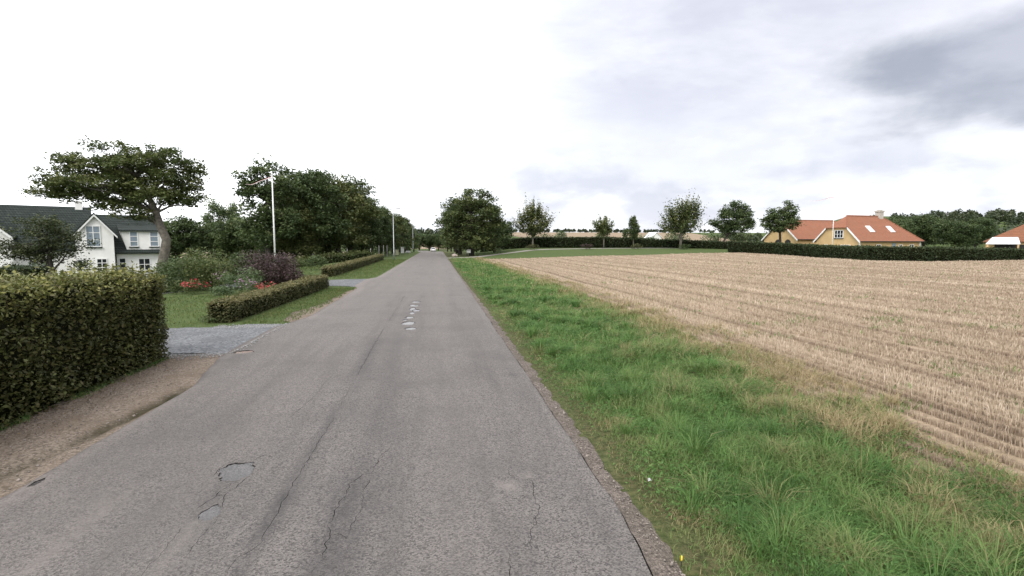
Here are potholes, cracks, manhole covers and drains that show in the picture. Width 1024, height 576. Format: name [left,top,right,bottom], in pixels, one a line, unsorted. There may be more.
crack [141,455,264,576]
pothole [198,504,221,521]
crack [491,322,653,576]
pothole [218,462,256,481]
crack [227,314,393,574]
